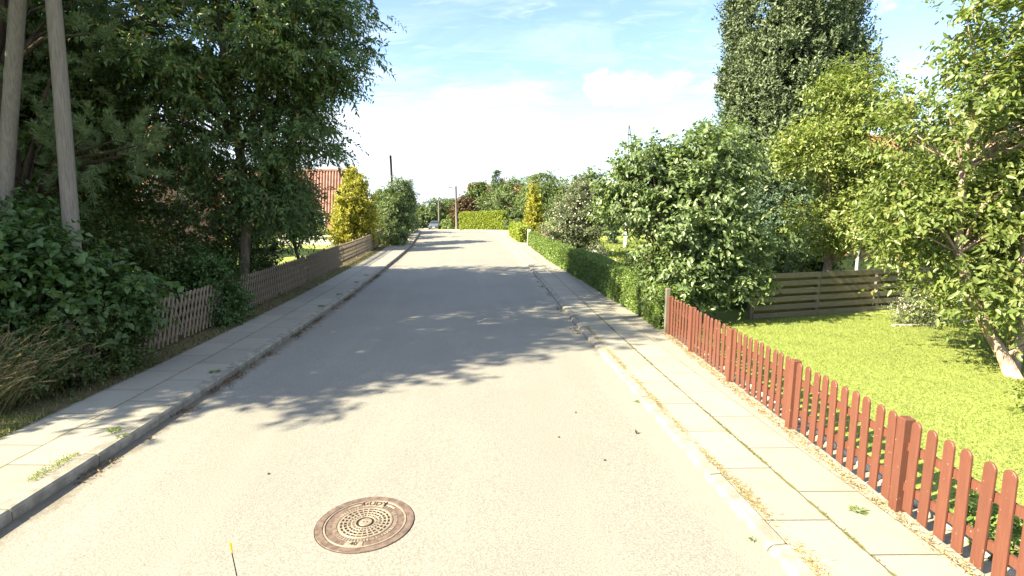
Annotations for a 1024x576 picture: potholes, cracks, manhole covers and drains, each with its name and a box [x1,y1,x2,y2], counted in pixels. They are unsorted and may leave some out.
manhole cover [314,497,415,554]
